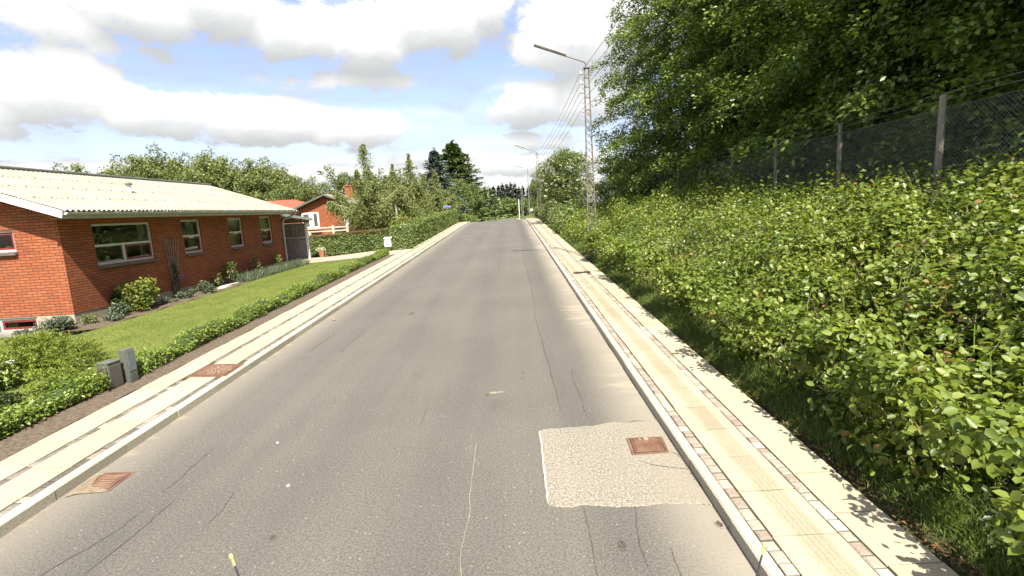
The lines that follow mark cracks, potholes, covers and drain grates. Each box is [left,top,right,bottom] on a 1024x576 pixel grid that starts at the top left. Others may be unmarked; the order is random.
crack [40,452,209,576]
crack [627,506,648,573]
manhole cover [187,363,245,378]
crack [521,244,587,416]
crack [460,446,476,576]
